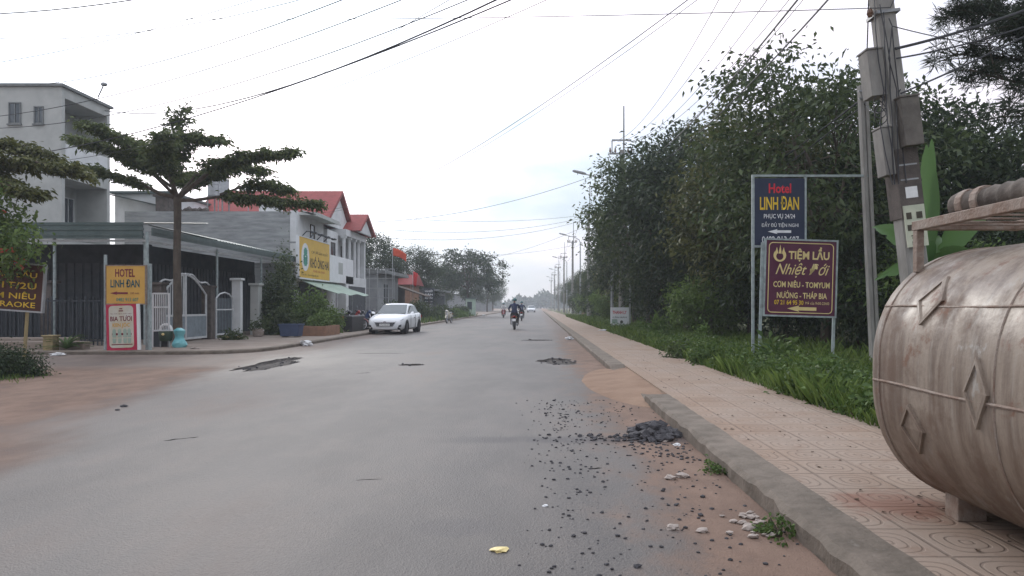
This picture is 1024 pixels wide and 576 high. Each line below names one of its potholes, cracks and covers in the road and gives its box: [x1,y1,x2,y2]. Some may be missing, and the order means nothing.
pothole [537,357,577,365]
pothole [229,357,302,372]
